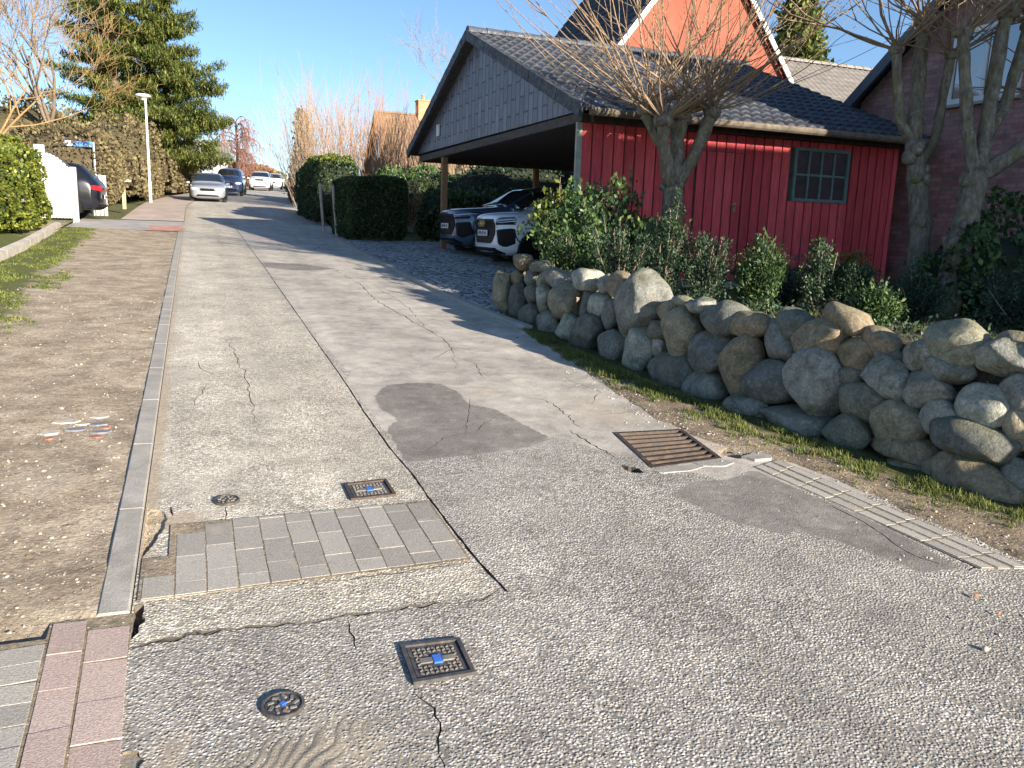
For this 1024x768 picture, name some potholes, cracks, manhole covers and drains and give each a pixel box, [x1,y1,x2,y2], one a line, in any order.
crack [337,271,482,376]
drain grate [613,429,722,469]
crack [545,400,616,458]
manhole cover [400,637,476,686]
crack [129,590,498,650]
crack [414,692,445,764]
manhole cover [344,479,397,501]
manhole cover [261,691,305,720]
crack [229,338,260,432]
manhole cover [213,494,240,506]
